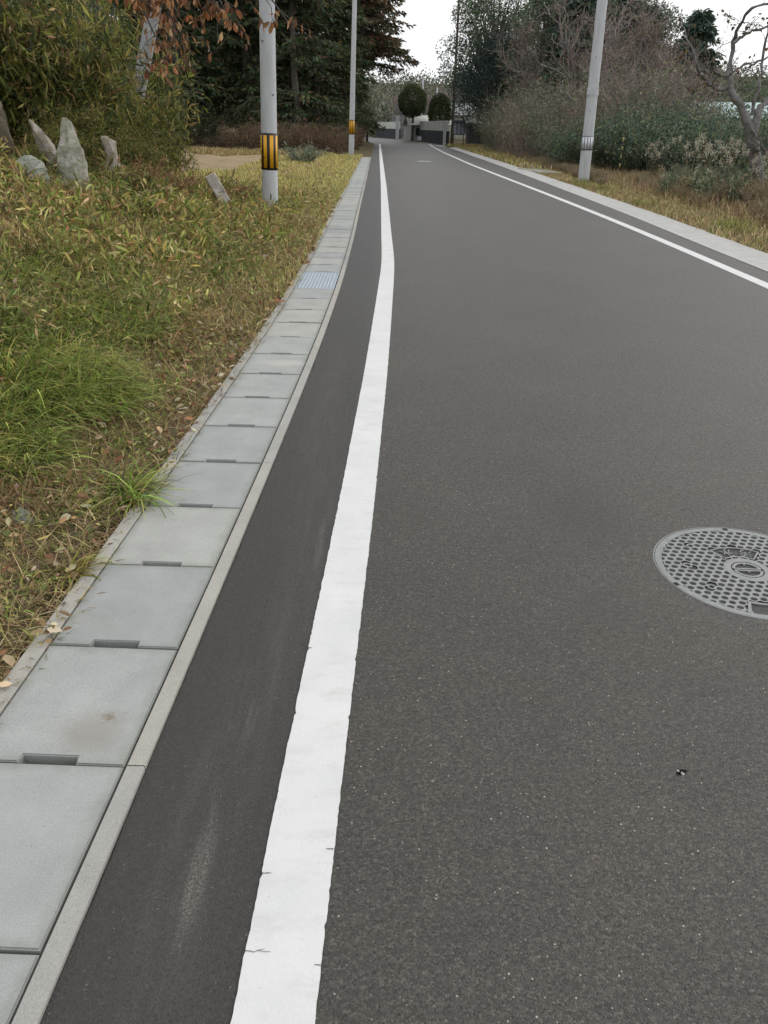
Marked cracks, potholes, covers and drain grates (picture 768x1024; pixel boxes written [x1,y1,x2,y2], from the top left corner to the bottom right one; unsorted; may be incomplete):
drain grate [295,272,339,290]
manhole cover [653,527,768,621]
